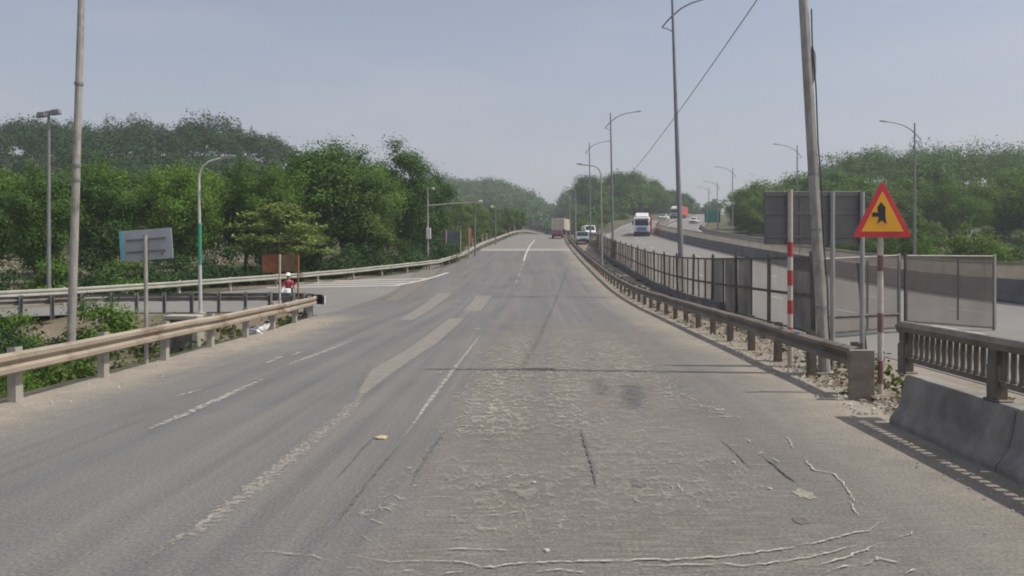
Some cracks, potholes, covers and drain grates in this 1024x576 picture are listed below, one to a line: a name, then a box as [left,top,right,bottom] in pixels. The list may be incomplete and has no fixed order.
crack [542,322,740,487]
crack [358,332,542,540]
crack [357,436,914,573]
